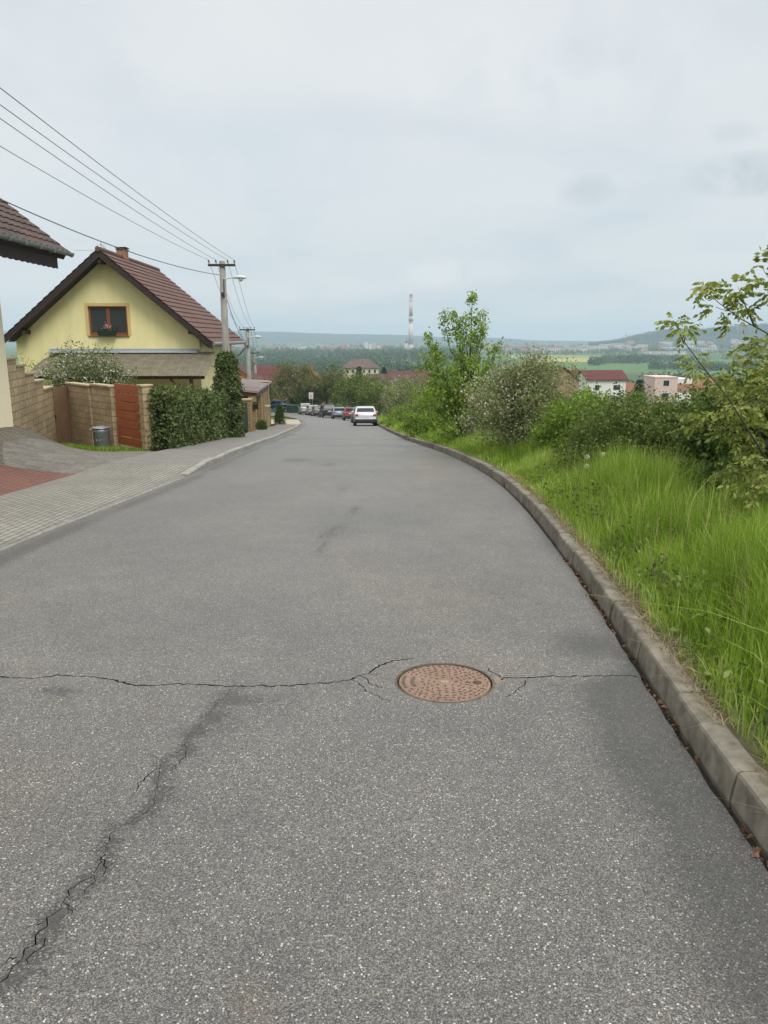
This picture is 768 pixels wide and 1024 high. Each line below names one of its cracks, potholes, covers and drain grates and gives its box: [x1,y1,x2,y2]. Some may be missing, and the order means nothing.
crack [0,658,413,700]
manhole cover [395,663,503,703]
crack [0,693,228,982]
crack [488,669,643,698]
